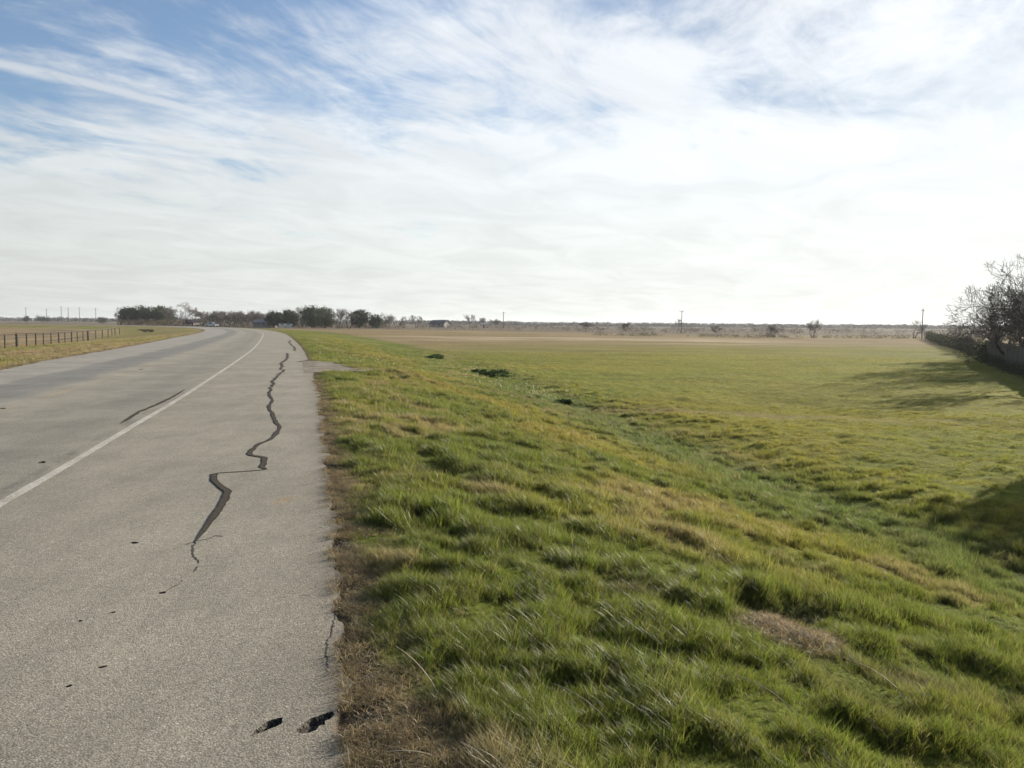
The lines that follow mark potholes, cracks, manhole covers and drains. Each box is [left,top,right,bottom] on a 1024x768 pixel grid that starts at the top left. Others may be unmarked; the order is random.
crack [166,340,309,591]
pothole [296,711,334,733]
crack [325,613,336,674]
pothole [251,717,283,736]
crack [120,386,185,424]
